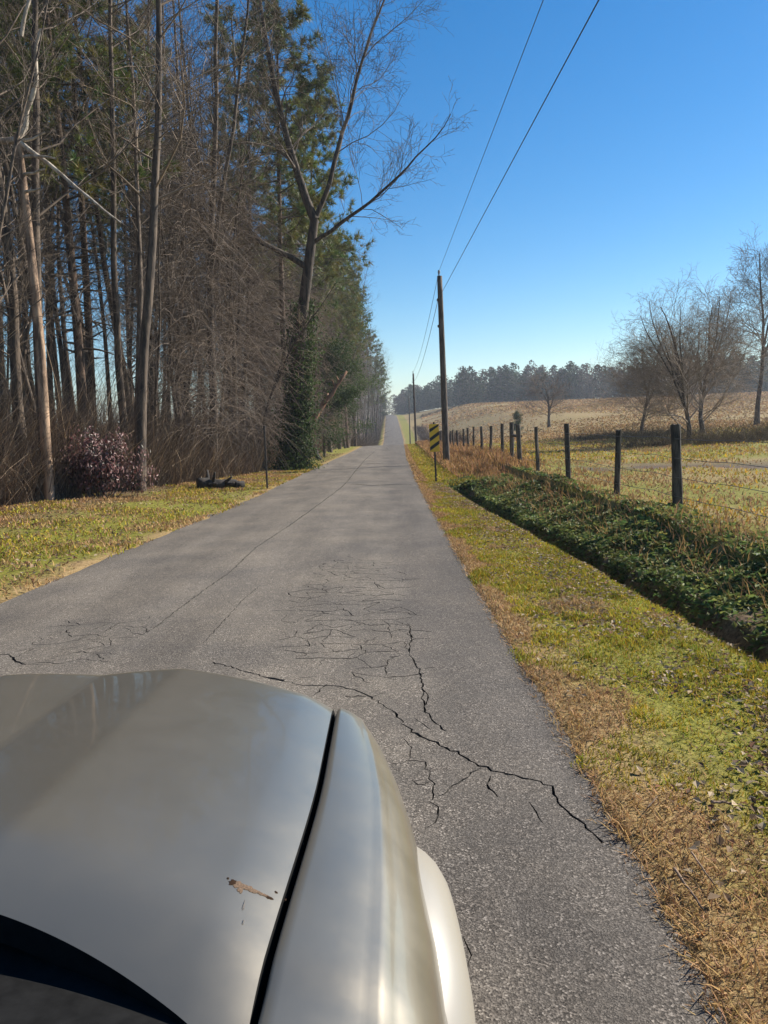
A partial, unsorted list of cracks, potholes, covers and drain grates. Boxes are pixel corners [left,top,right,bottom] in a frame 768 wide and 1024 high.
crack [0,616,150,665]
crack [213,554,604,843]
